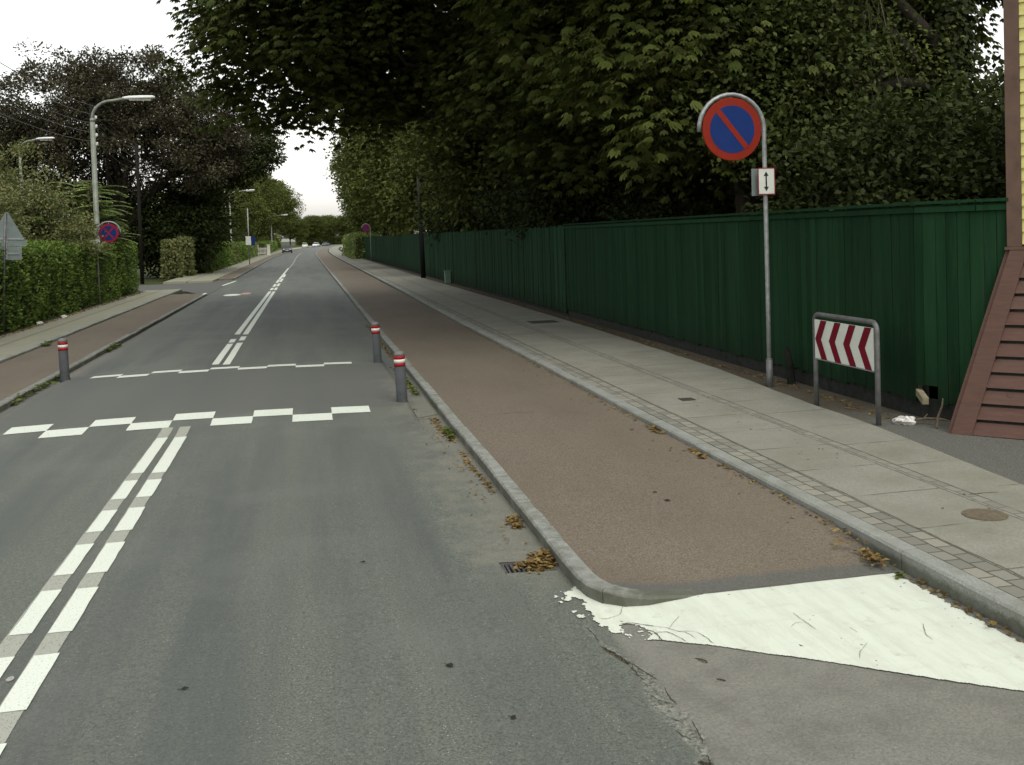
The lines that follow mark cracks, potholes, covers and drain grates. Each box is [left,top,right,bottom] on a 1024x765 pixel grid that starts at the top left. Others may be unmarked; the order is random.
drain grate [500,561,556,574]
manhole cover [961,508,1009,521]
